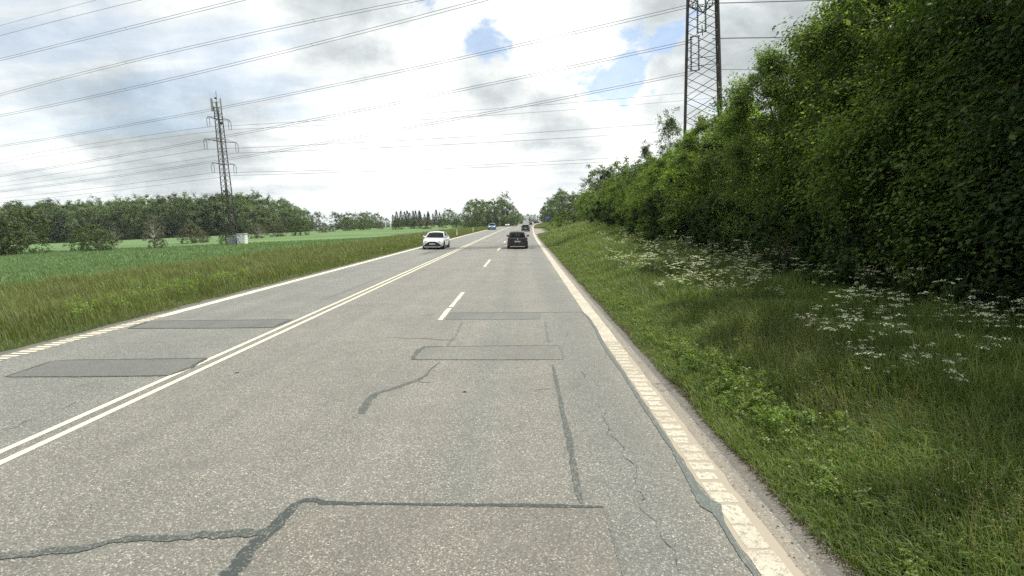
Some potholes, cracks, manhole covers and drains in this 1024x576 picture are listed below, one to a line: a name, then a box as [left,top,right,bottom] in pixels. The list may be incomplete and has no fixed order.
crack [0,527,276,559]
crack [598,403,679,568]
crack [358,314,463,414]
